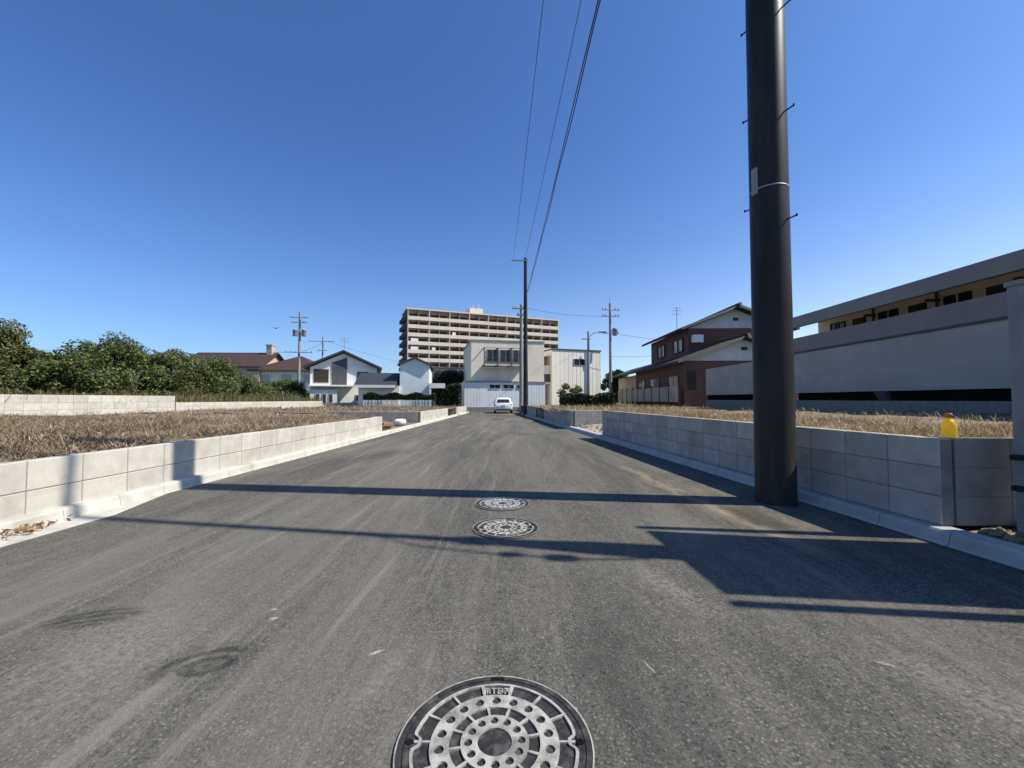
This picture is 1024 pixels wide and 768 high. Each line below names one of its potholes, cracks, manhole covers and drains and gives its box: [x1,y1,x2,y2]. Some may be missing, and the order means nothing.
manhole cover [475,497,529,511]
manhole cover [473,518,539,539]
manhole cover [393,676,595,768]
